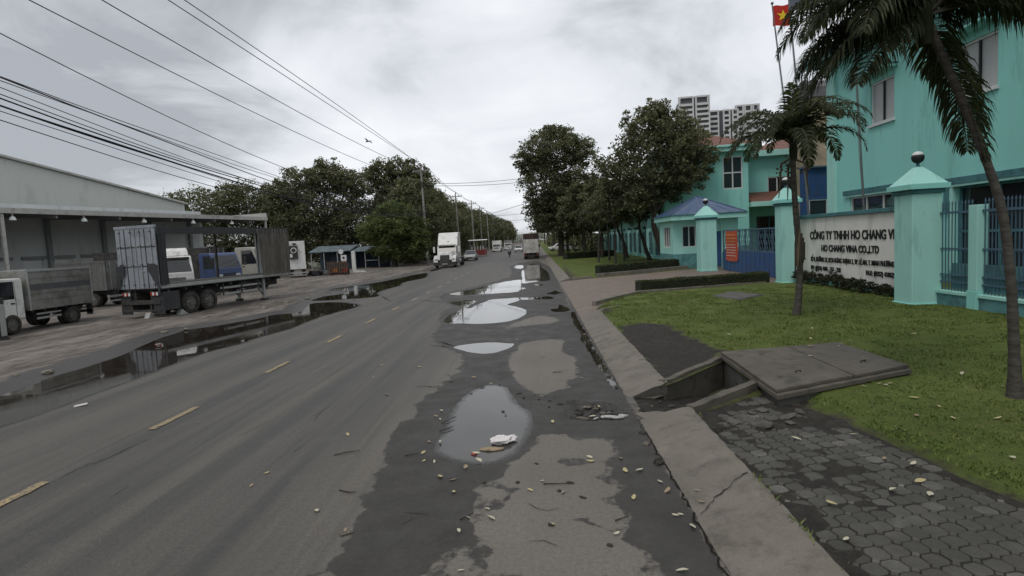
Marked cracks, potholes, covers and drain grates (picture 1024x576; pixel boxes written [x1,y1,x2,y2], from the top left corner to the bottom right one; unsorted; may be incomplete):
pothole [444,298,527,324]
pothole [453,342,515,354]
pothole [431,384,535,465]
pothole [564,400,630,422]
pothole [450,279,522,295]
manhole cover [721,346,853,393]
manhole cover [712,291,764,300]
